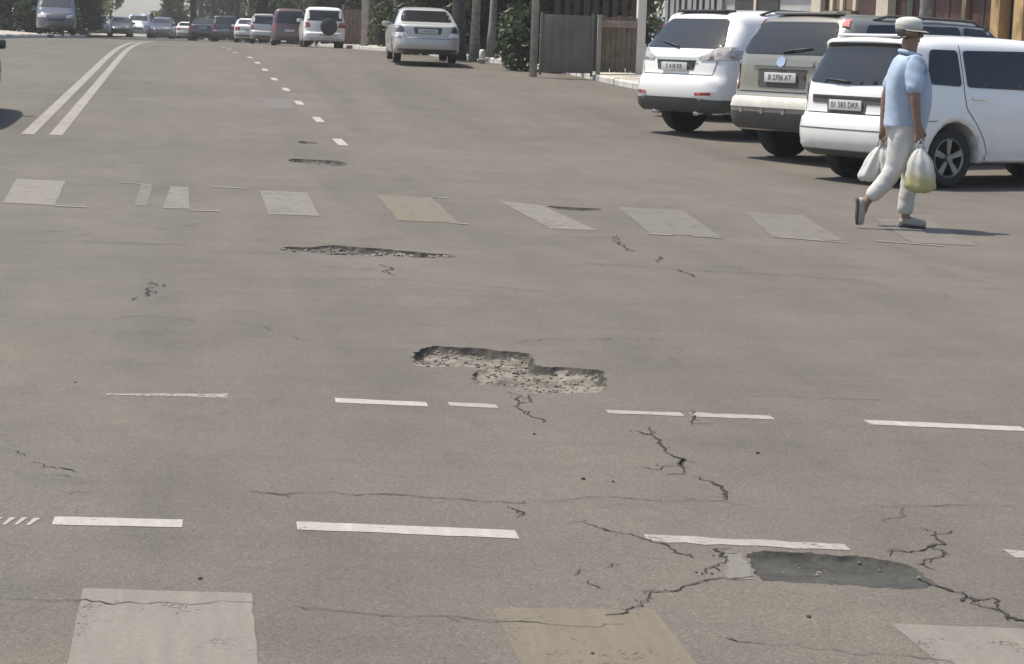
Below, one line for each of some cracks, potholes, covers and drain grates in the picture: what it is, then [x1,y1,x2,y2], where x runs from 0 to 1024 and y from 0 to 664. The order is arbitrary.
pothole [411,346,608,394]
pothole [280,245,456,258]
crack [587,235,1014,289]
crack [554,410,737,504]
crack [293,521,749,627]
crack [1,597,253,605]
crack [507,391,546,422]
pothole [288,159,347,167]
crack [250,490,525,517]
crack [117,282,312,340]
crack [17,450,80,494]
crack [890,528,1024,620]
